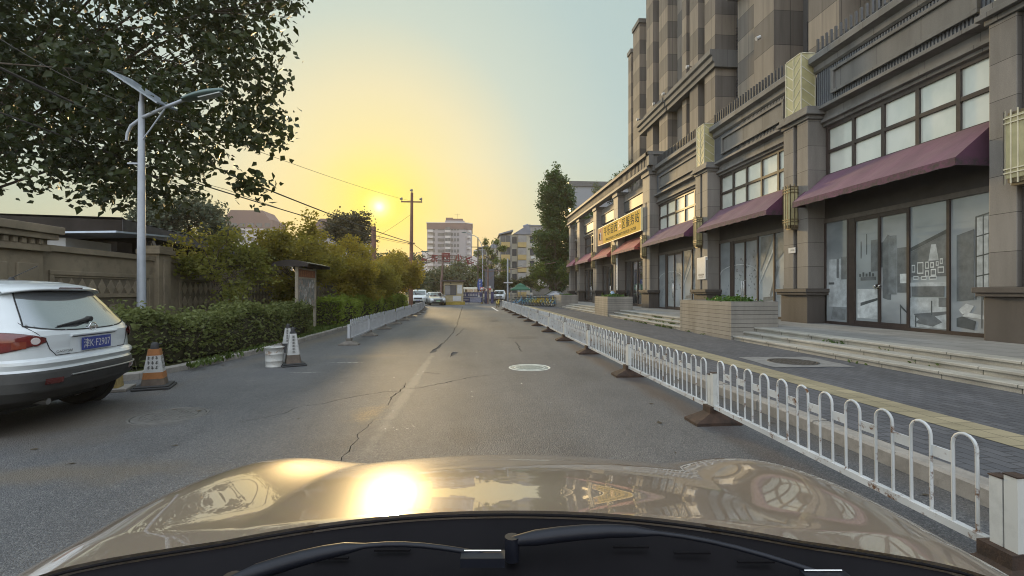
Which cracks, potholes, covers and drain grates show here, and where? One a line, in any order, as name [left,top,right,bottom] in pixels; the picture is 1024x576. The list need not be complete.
manhole cover [739,357,855,367]
crack [430,307,464,353]
manhole cover [125,407,210,425]
crack [242,372,488,461]
